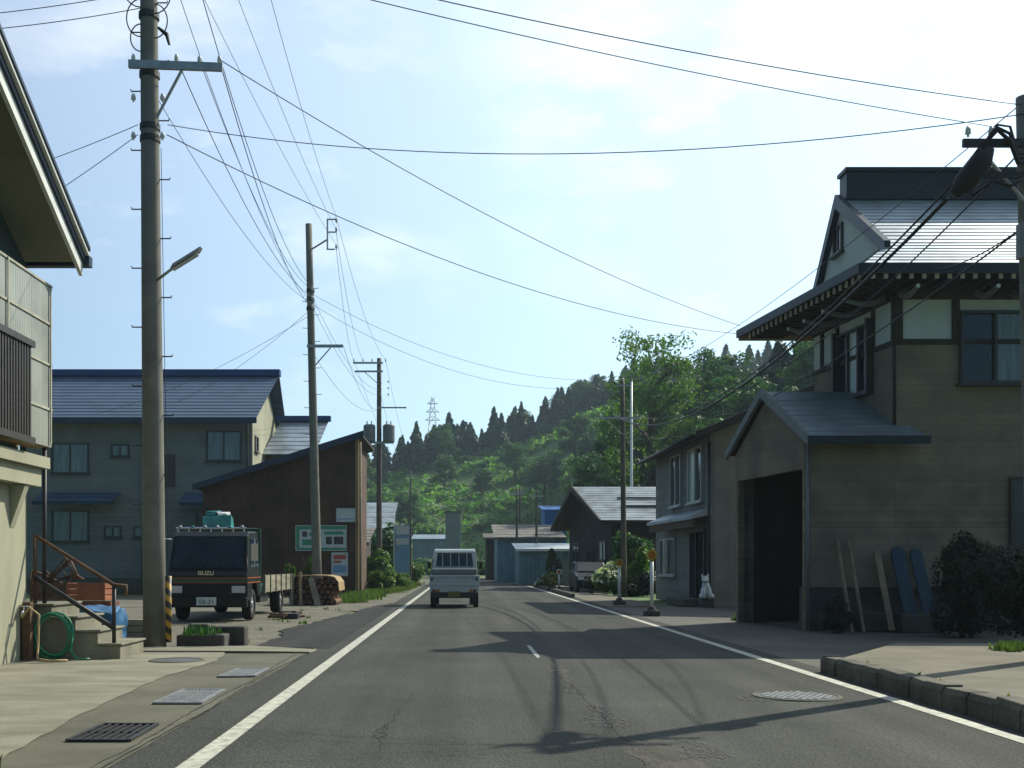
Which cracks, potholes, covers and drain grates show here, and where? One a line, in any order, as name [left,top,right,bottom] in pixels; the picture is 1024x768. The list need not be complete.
crack [548,664,647,766]
drain grate [152,689,225,704]
drain grate [217,668,269,677]
manhole cover [751,690,843,702]
drain grate [65,723,159,742]
